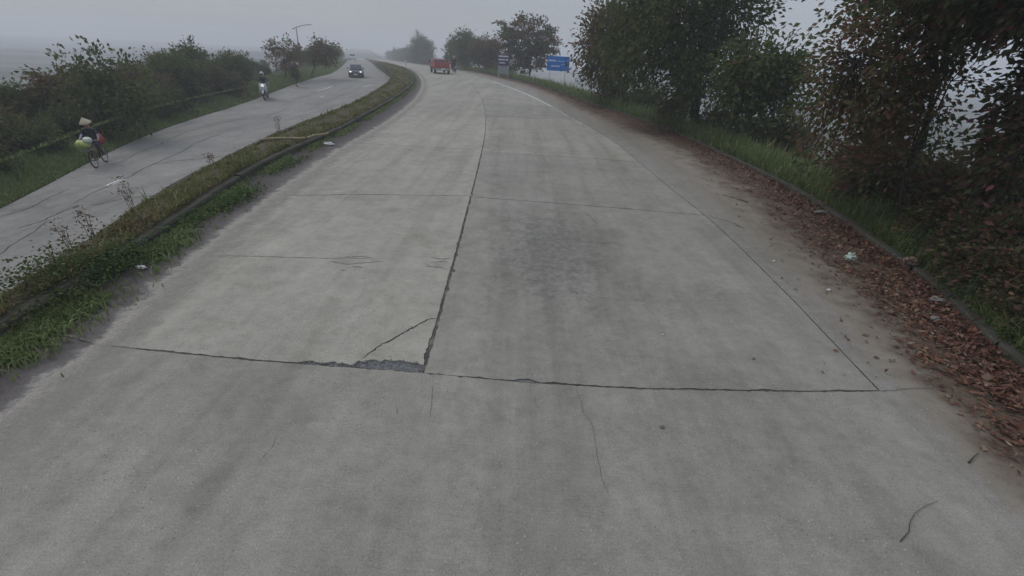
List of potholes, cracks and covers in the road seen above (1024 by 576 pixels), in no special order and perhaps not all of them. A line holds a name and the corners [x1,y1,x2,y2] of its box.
crack [363,317,438,358]
pothole [303,359,424,373]
